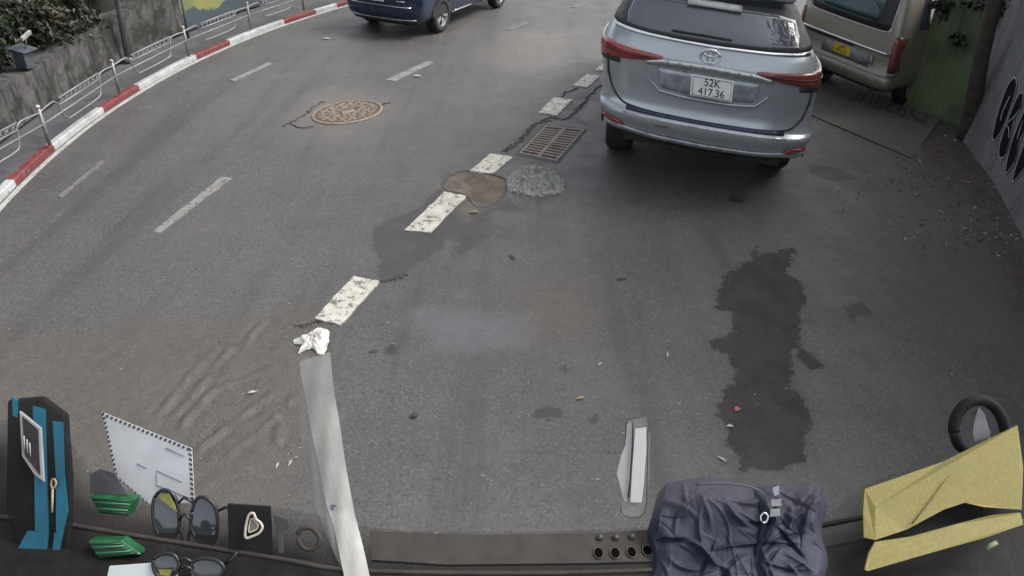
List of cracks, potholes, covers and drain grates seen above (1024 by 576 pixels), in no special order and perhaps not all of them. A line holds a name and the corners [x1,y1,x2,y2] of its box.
manhole cover [311,100,383,125]
crack [379,274,409,283]
crack [502,116,561,152]
drain grate [514,125,588,164]
crack [283,101,324,128]
